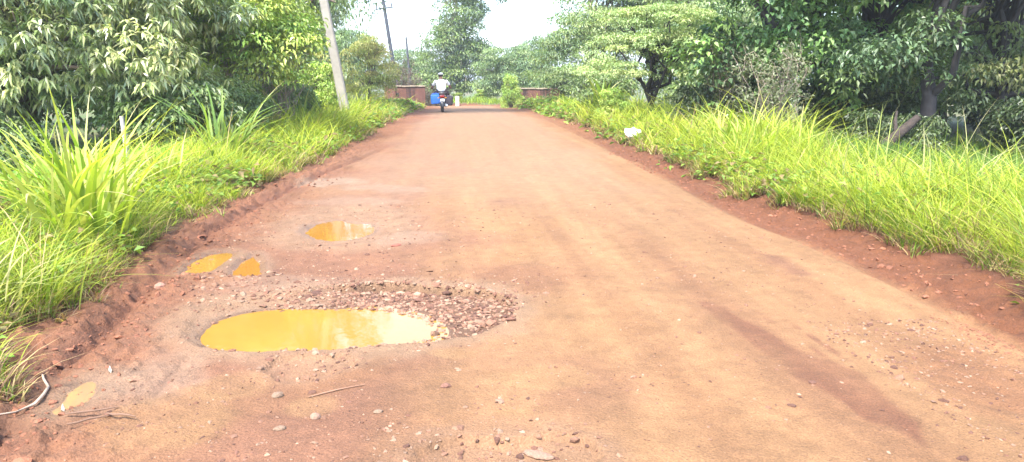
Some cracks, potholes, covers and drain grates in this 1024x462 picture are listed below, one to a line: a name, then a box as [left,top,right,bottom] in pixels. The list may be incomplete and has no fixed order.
pothole [174,283,516,353]
pothole [224,252,269,277]
pothole [34,371,111,422]
pothole [173,248,240,274]
pothole [285,207,410,246]
